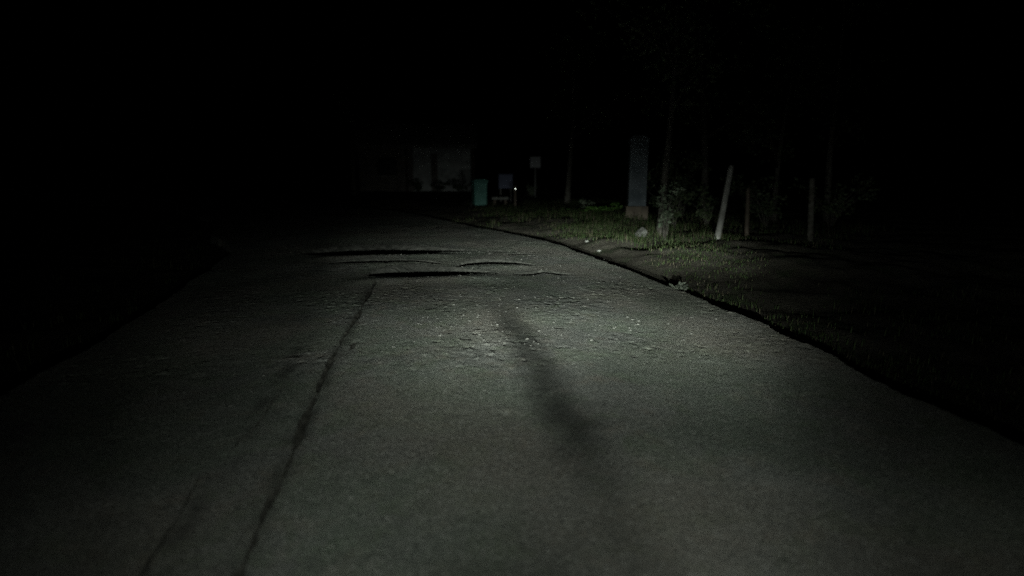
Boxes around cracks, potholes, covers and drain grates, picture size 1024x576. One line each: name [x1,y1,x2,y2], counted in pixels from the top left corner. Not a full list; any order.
pothole [366,263,502,277]
crack [139,280,415,576]
pothole [455,258,537,267]
